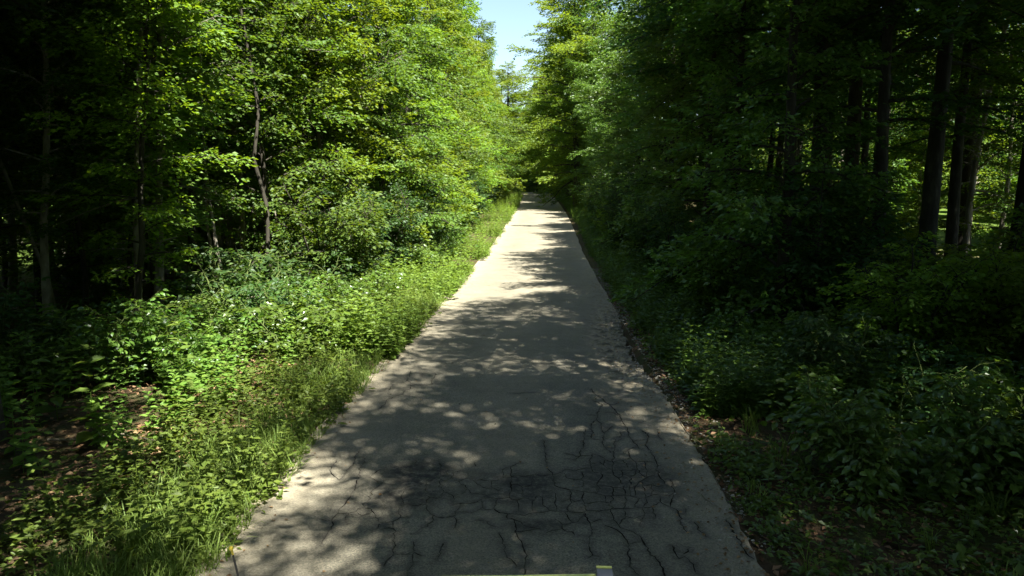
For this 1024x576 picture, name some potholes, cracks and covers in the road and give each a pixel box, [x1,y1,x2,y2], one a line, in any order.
crack [536,388,706,576]
crack [322,451,387,541]
crack [371,460,537,576]
